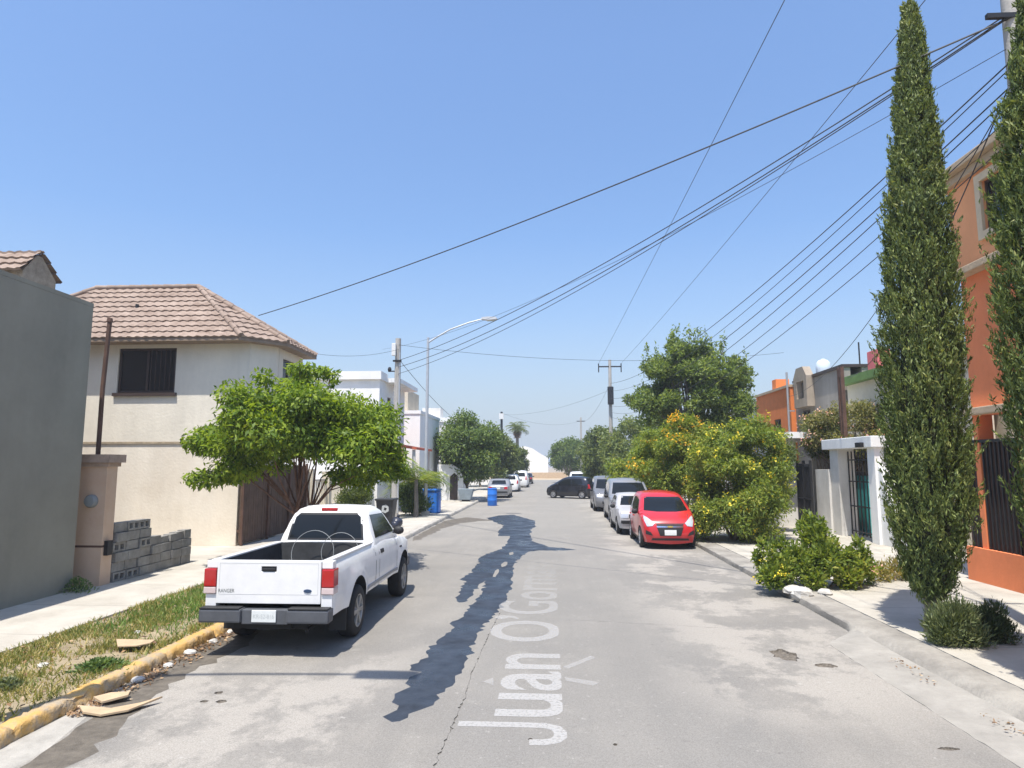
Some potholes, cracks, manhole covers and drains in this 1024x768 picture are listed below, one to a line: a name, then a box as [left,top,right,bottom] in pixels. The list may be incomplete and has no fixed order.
pothole [769,649,800,661]
